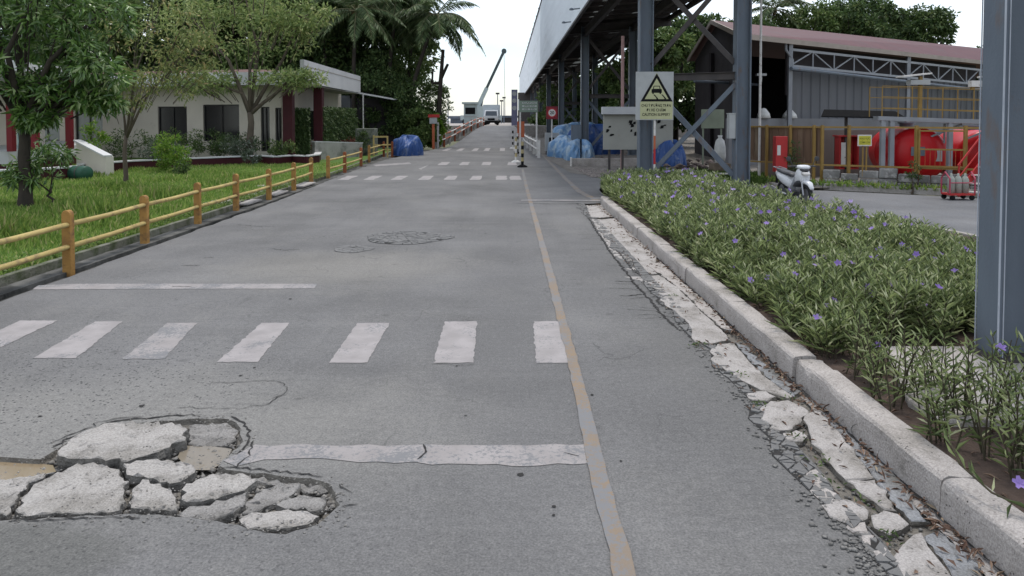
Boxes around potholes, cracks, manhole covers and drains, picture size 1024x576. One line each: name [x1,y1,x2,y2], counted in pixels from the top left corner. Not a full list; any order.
crack [576,203,910,576]
crack [53,380,354,506]
pothole [0,418,340,525]
